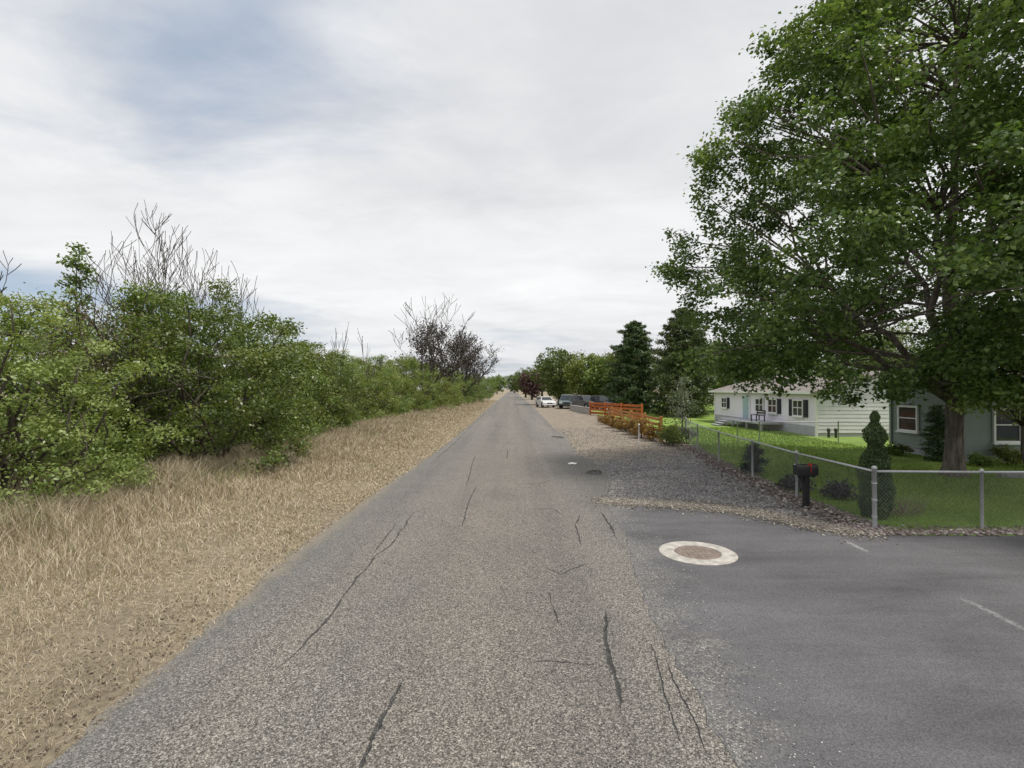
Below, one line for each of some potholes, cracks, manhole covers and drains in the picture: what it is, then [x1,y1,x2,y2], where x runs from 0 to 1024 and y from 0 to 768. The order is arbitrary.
crack [273,512,414,672]
crack [462,455,477,527]
manhole cover [659,541,738,566]
crack [533,612,622,709]
crack [667,663,704,748]
